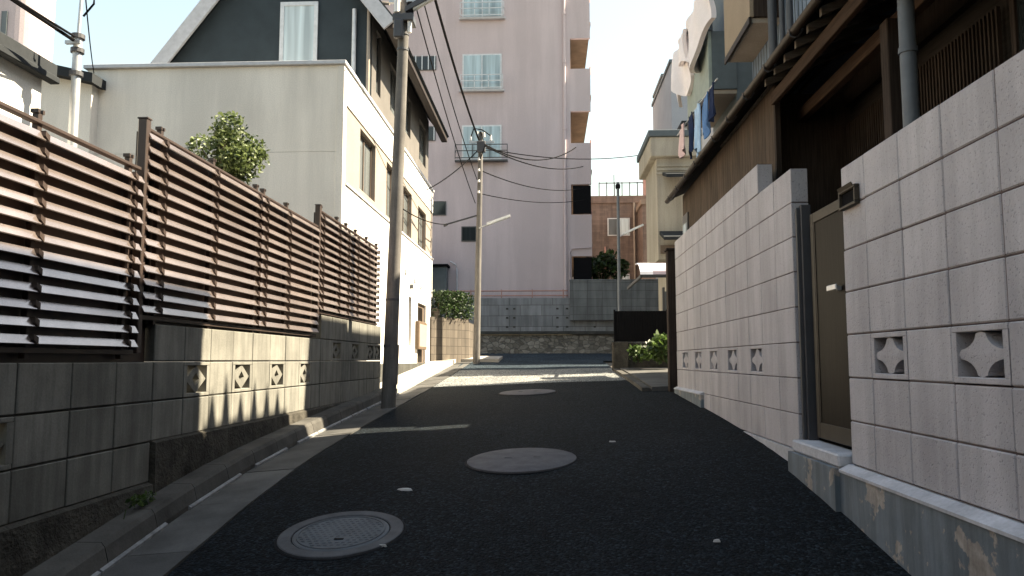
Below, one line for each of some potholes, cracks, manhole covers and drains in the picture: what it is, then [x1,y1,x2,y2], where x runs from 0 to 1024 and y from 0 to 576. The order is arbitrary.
manhole cover [274,511,406,561]
manhole cover [464,448,577,475]
